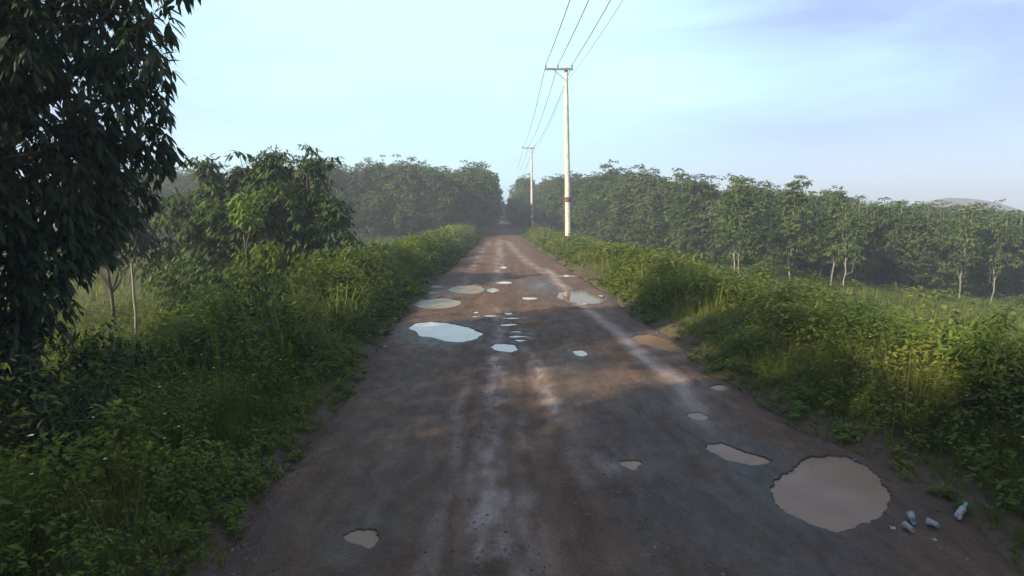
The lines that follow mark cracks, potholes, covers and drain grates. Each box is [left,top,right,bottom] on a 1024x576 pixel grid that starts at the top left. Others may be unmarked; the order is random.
pothole [556,289,607,304]
pothole [630,334,684,352]
pothole [489,343,519,352]
pothole [770,454,894,532]
pothole [447,284,485,294]
pothole [704,442,774,466]
pothole [413,298,463,308]
pothole [619,459,642,470]
pothole [686,412,709,420]
pothole [342,528,380,549]
pothole [408,321,483,342]
